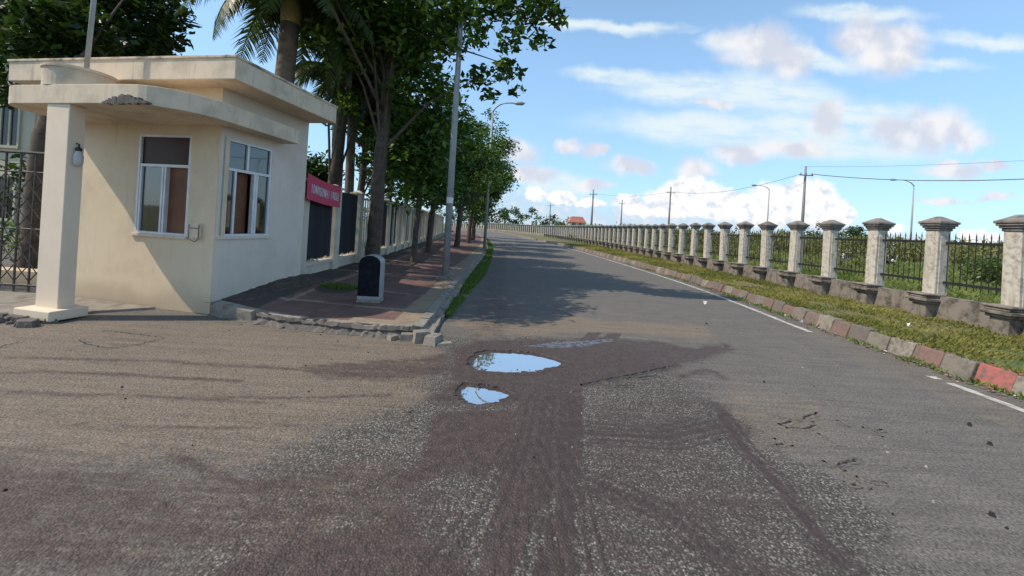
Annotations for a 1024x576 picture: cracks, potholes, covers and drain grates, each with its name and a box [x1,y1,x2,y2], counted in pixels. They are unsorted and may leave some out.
crack [770,411,888,490]
crack [74,329,167,349]
pothole [460,348,572,376]
pothole [447,380,522,409]
